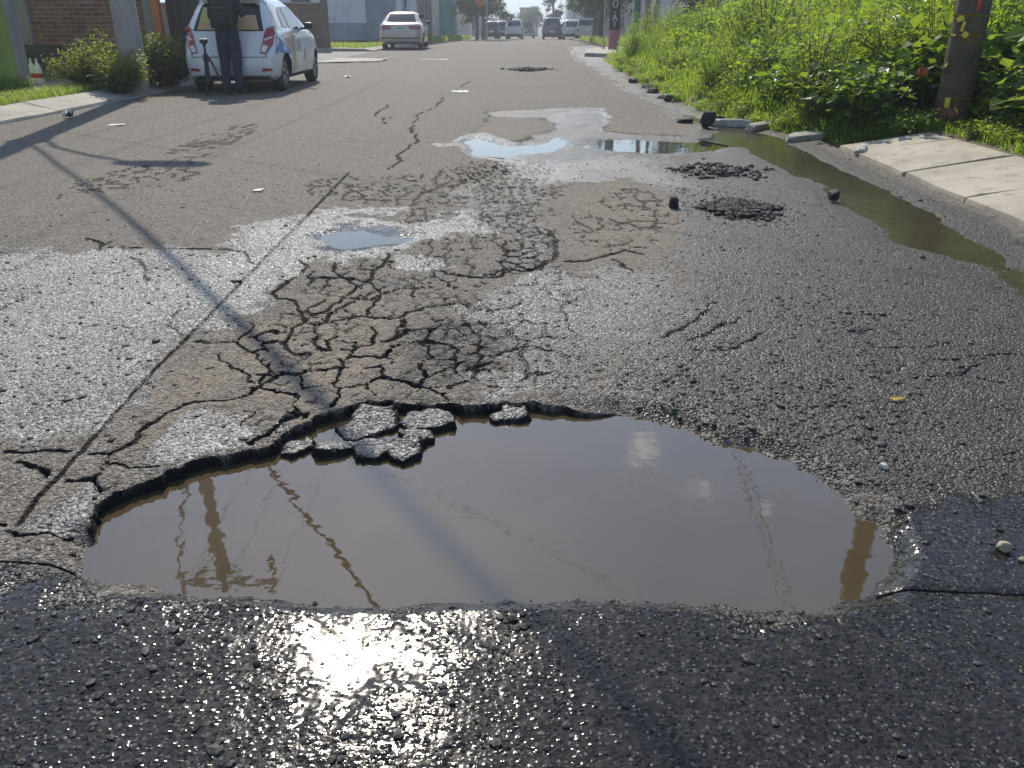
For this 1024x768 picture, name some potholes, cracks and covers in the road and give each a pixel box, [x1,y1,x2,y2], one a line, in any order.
pothole [306,222,447,254]
crack [2,81,681,494]
crack [660,301,763,352]
pothole [456,108,724,163]
pothole [86,399,774,599]
